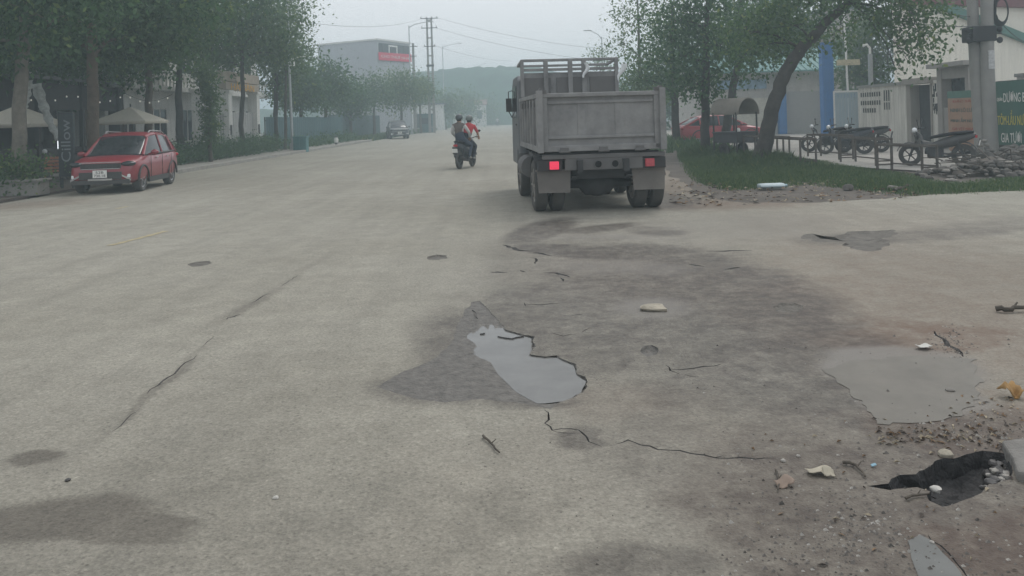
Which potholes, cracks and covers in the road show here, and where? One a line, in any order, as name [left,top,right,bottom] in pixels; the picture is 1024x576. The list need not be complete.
crack [544,410,776,460]
crack [112,276,297,432]
crack [935,332,964,357]
crack [492,245,550,273]
pothole [378,301,587,409]
pothole [640,345,659,357]
pothole [870,451,1013,507]
crack [666,364,720,377]
